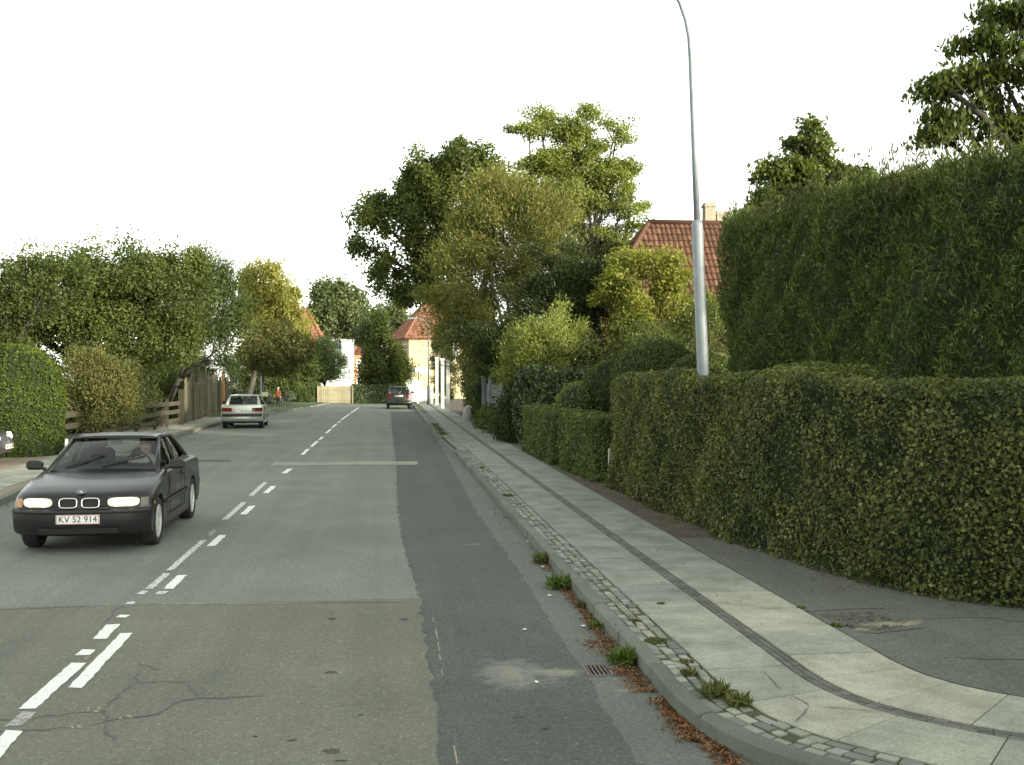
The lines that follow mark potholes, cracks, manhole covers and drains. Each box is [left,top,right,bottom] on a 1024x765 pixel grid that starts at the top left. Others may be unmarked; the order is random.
drain grate [581,663,615,677]
crack [764,672,870,722]
crack [0,663,272,741]
